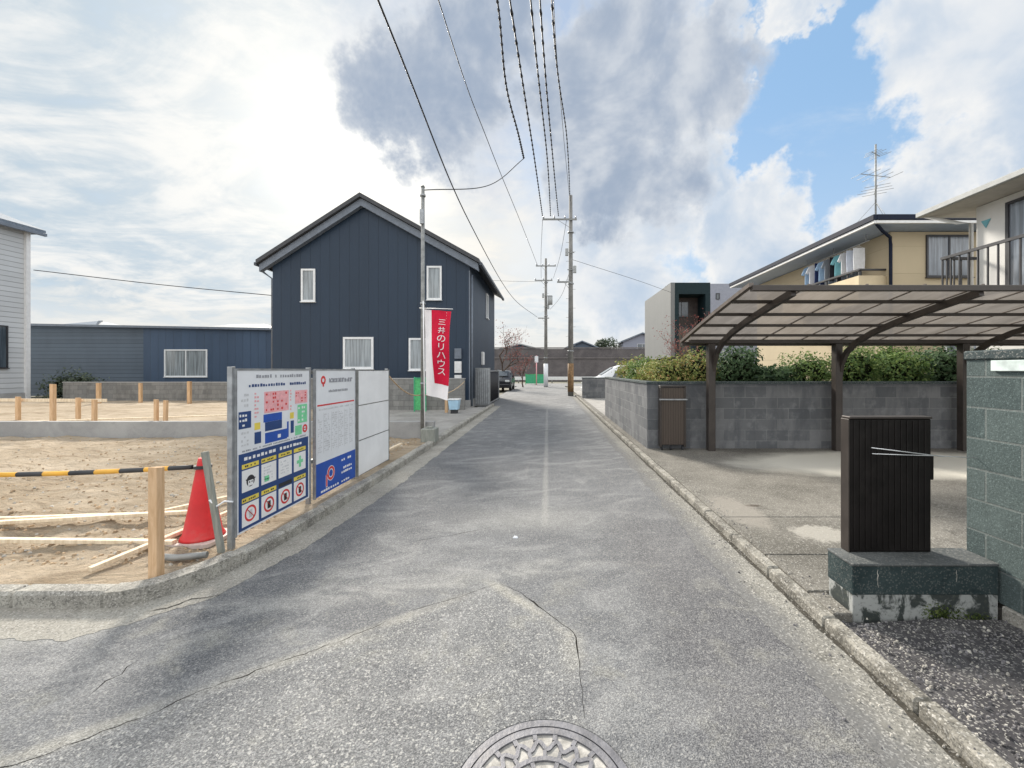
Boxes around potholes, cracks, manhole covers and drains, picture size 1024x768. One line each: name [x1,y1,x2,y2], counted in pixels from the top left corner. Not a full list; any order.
crack [511,588,585,718]
manhole cover [462,720,627,768]
crack [0,624,381,768]
